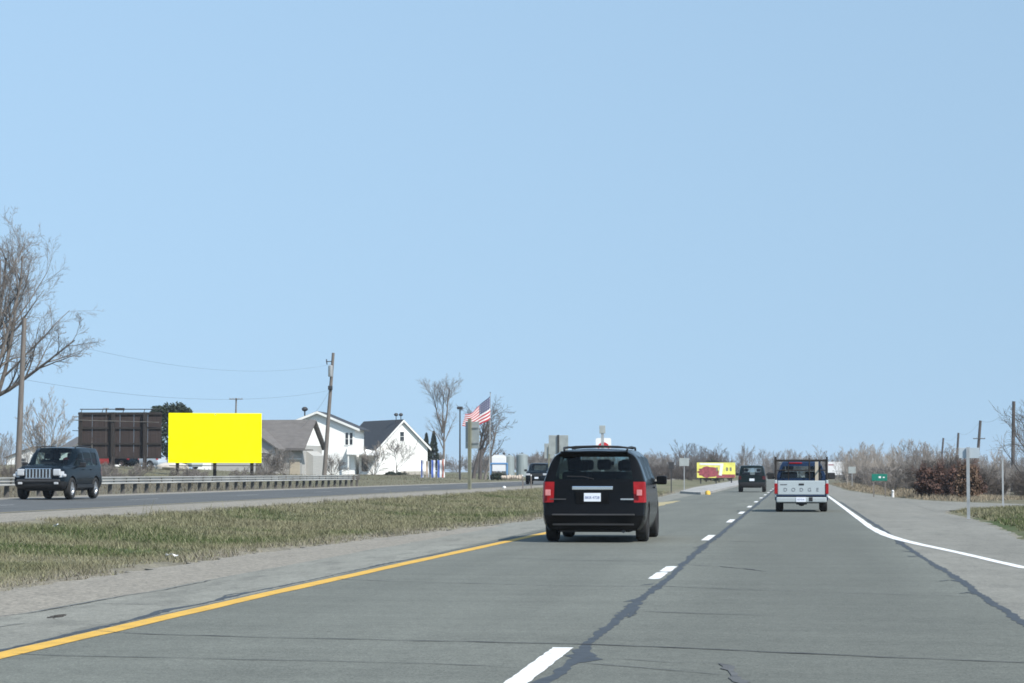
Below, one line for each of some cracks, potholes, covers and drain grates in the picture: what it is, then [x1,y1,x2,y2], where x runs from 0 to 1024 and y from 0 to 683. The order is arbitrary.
crack [0,531,1010,674]
